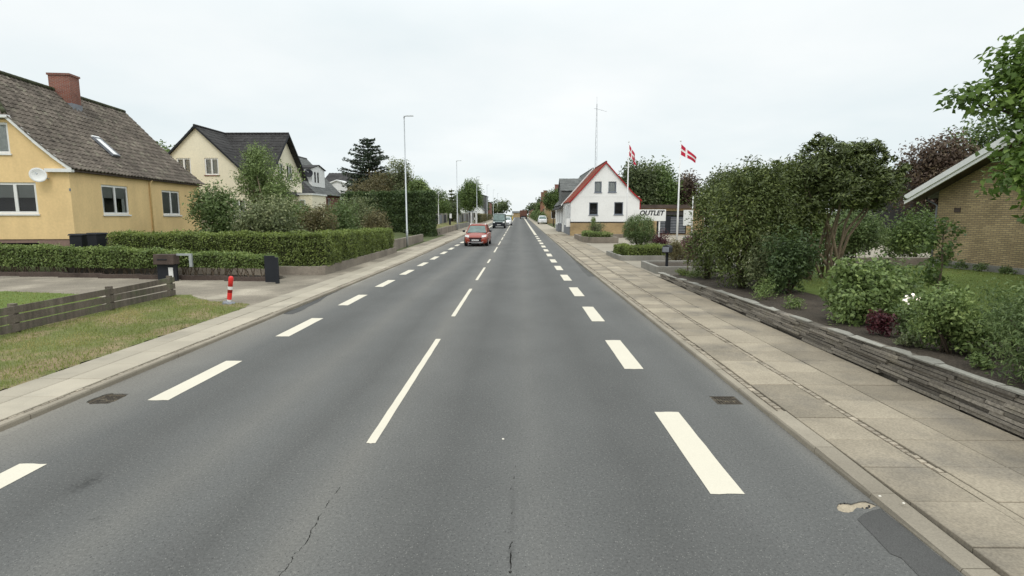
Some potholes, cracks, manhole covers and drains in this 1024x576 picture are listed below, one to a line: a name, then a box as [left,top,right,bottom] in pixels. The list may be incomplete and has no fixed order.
pothole [837,502,875,513]
drain grate [709,396,743,405]
drain grate [87,394,126,404]
